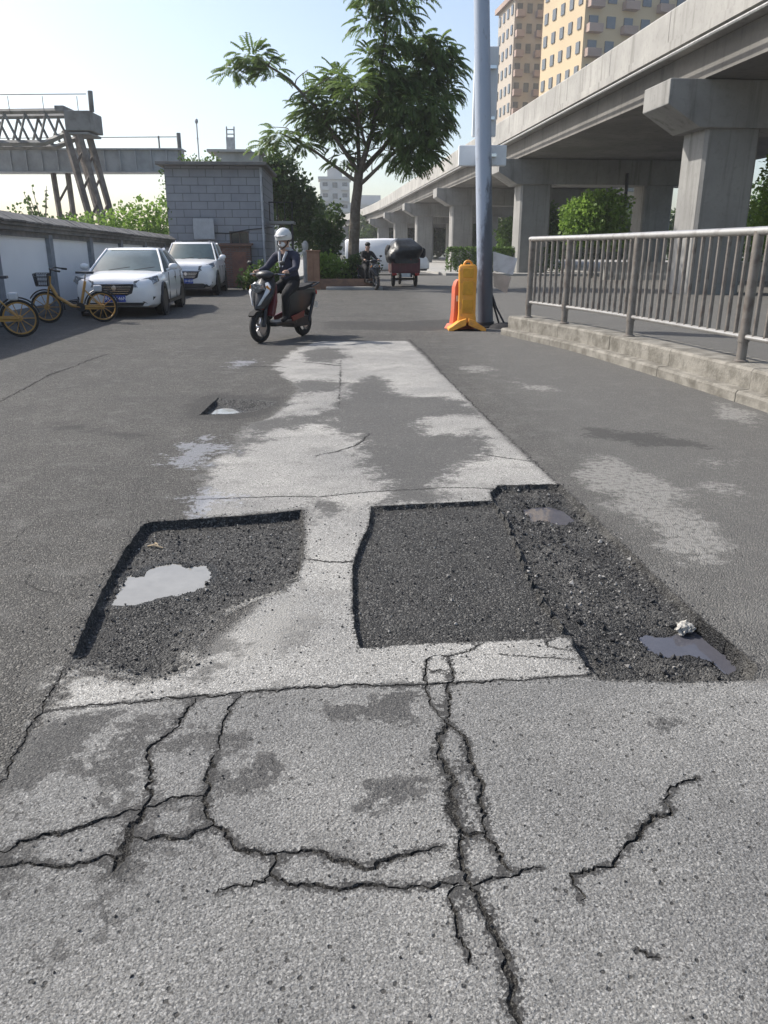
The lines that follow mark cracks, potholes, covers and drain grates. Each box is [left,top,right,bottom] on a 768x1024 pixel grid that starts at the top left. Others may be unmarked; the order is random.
crack [0,637,572,1024]
crack [2,355,103,401]
crack [569,777,701,901]
pothole [490,484,758,683]
pothole [200,397,277,415]
pothole [69,510,305,681]
